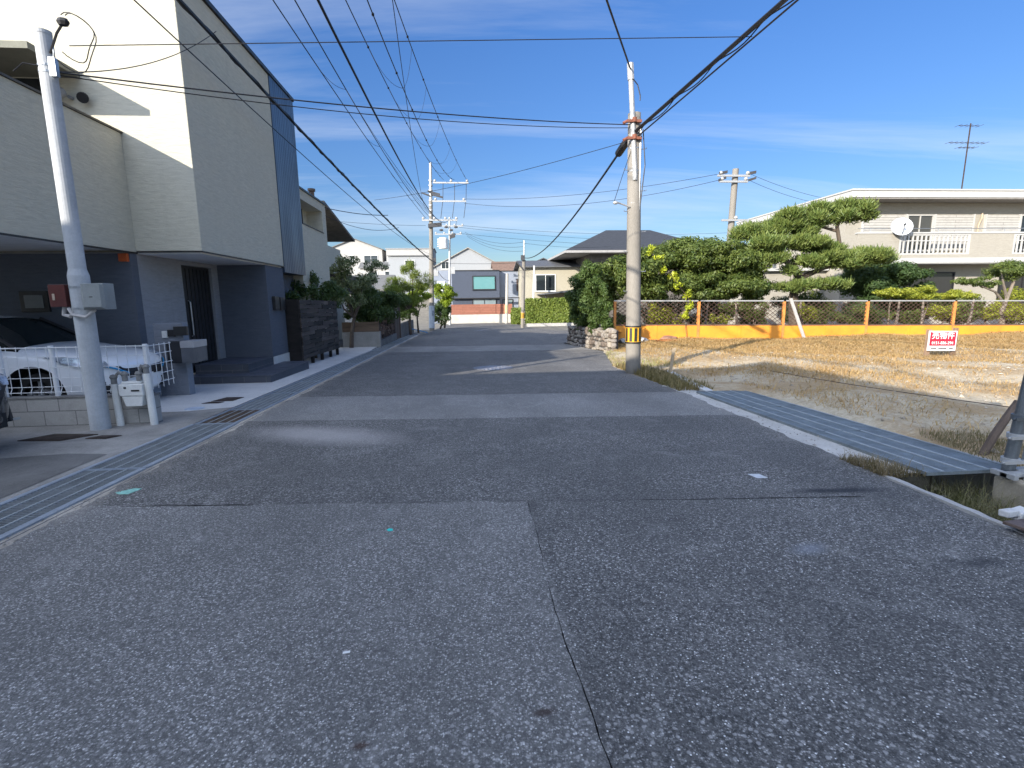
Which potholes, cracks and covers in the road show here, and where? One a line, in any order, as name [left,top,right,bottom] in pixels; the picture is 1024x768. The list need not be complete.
drain grate [0,468,146,541]
drain grate [81,423,238,470]
drain grate [696,390,798,409]
drain grate [195,409,265,424]
drain grate [812,429,1001,476]
drain grate [742,406,879,434]
